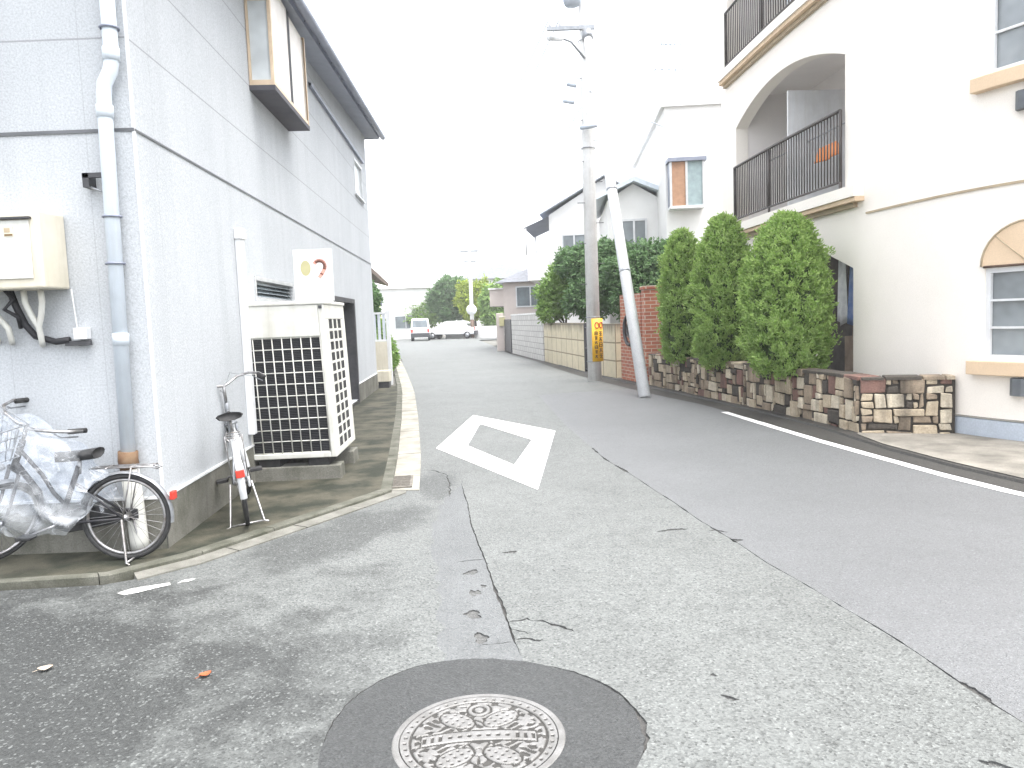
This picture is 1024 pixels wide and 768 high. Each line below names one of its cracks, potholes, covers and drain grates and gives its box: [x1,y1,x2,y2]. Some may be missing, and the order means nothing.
manhole cover [392,694,566,768]
pothole [463,610,482,619]
pothole [474,632,490,644]
crack [432,470,574,655]
drain grate [392,475,413,488]
